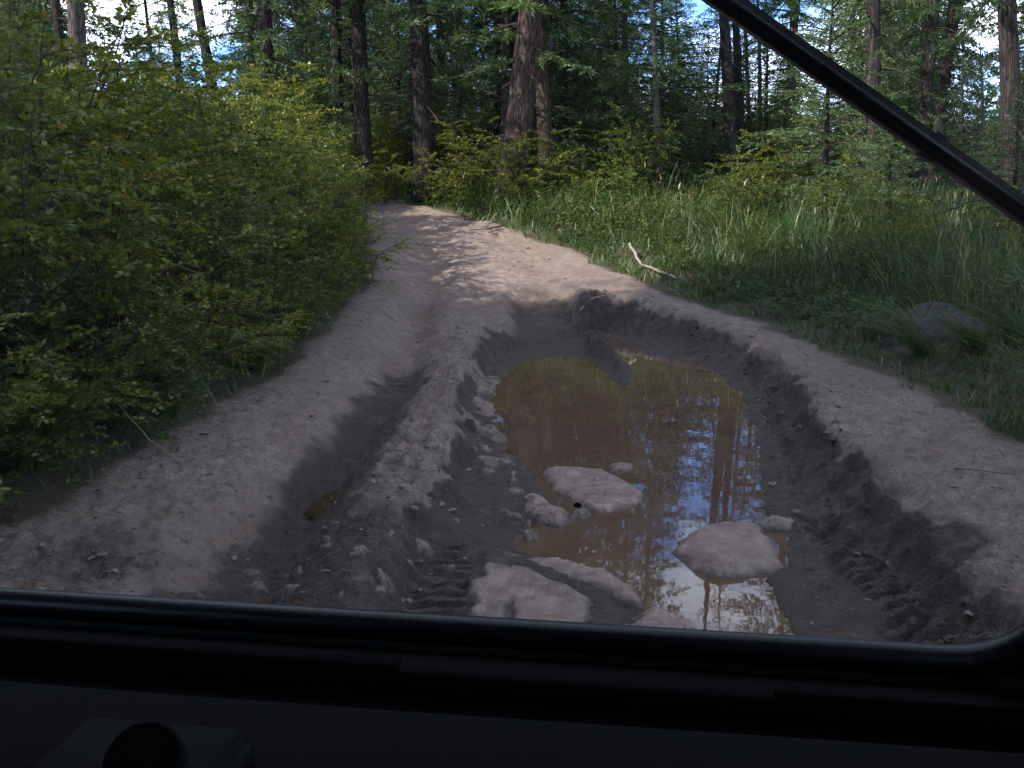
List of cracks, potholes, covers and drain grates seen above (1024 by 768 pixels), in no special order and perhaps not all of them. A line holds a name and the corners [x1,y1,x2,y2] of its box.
pothole [349,291,1024,644]
